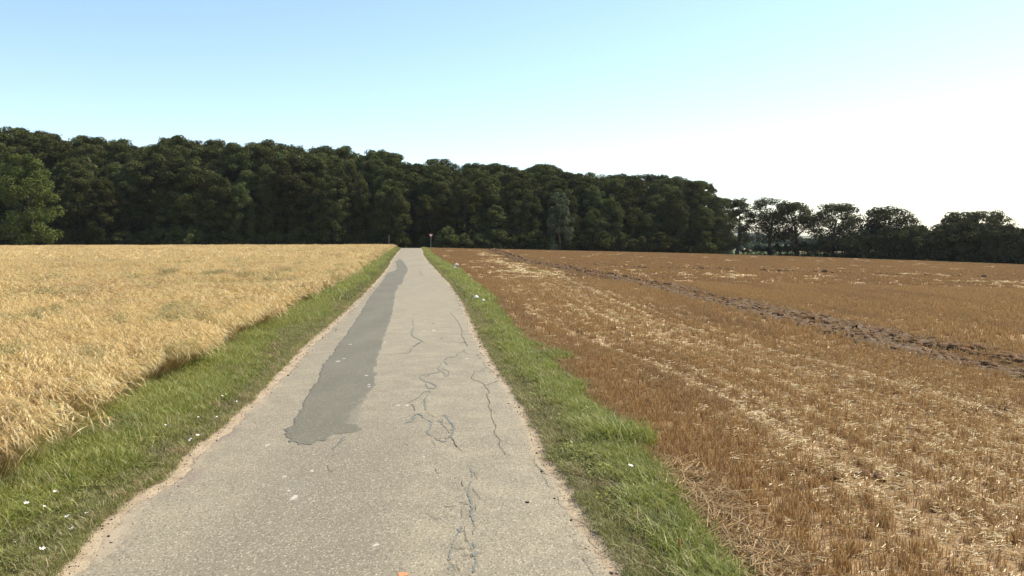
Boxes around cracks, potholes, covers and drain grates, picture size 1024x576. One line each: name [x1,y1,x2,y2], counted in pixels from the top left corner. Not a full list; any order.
crack [471,367,508,450]
